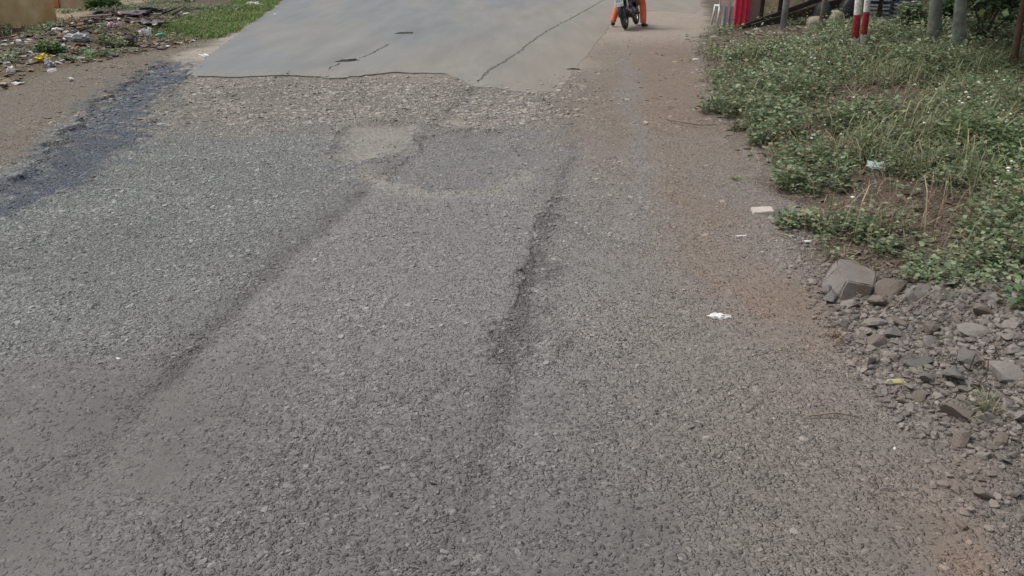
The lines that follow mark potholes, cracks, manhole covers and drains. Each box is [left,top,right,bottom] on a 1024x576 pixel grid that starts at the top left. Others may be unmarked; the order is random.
crack [477,0,604,83]
